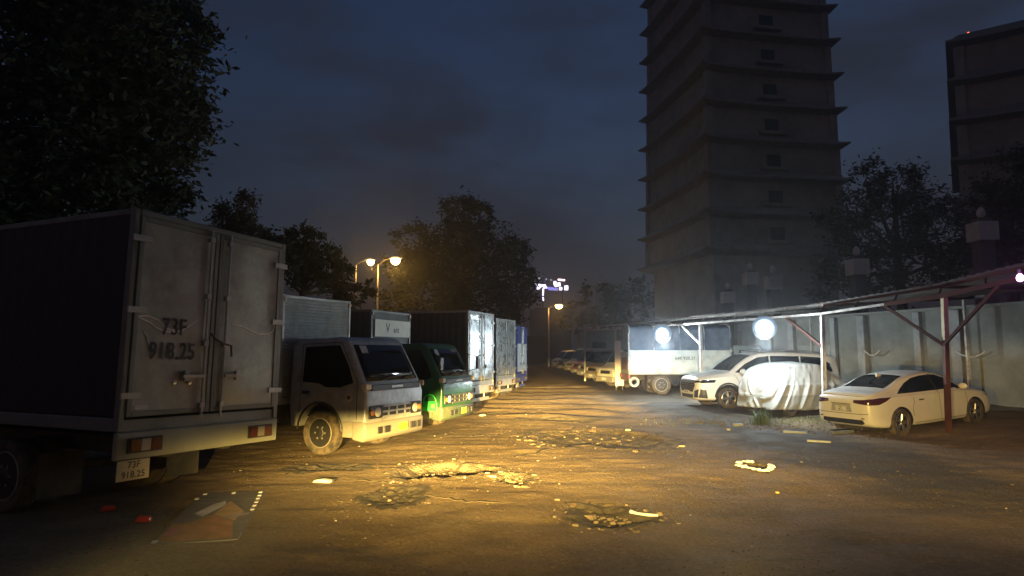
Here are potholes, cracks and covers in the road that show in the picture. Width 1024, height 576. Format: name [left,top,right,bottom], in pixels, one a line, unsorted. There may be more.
pothole [350,483,433,513]
pothole [485,471,541,488]
pothole [509,426,689,454]
pothole [735,460,776,474]
pothole [381,458,520,483]
pothole [552,498,667,533]
crack [424,494,503,503]
